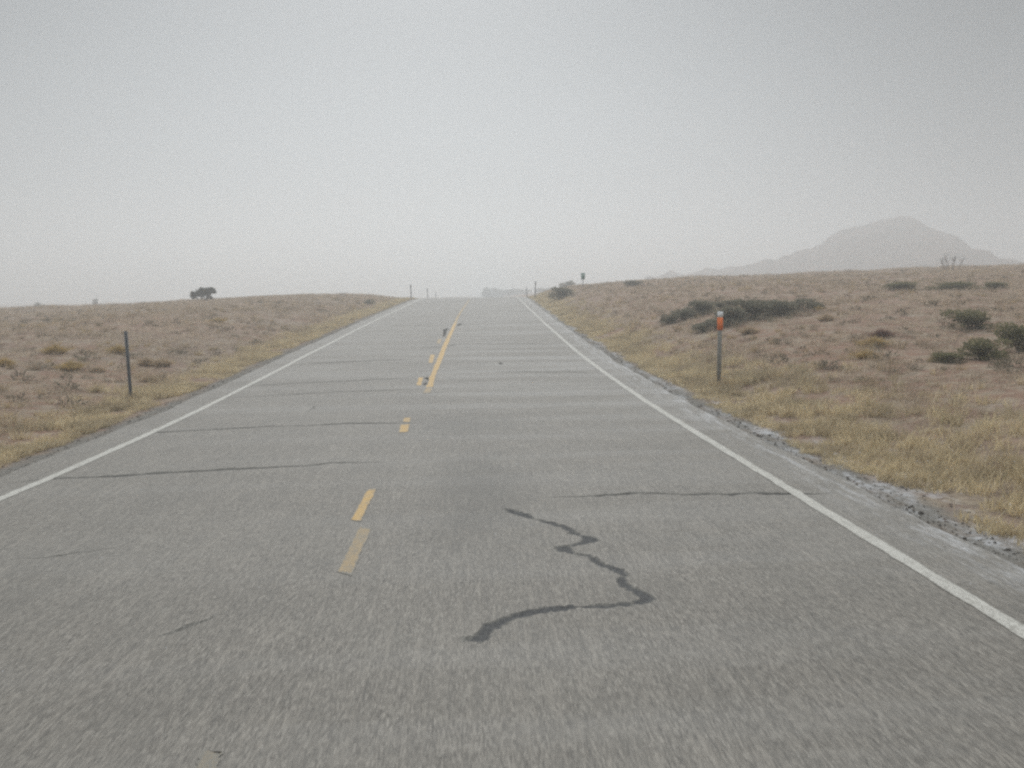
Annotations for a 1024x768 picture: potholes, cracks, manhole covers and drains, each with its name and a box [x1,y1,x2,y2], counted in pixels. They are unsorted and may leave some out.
crack [138,378,408,435]
crack [159,615,216,637]
crack [4,546,122,562]
crack [4,462,373,484]
